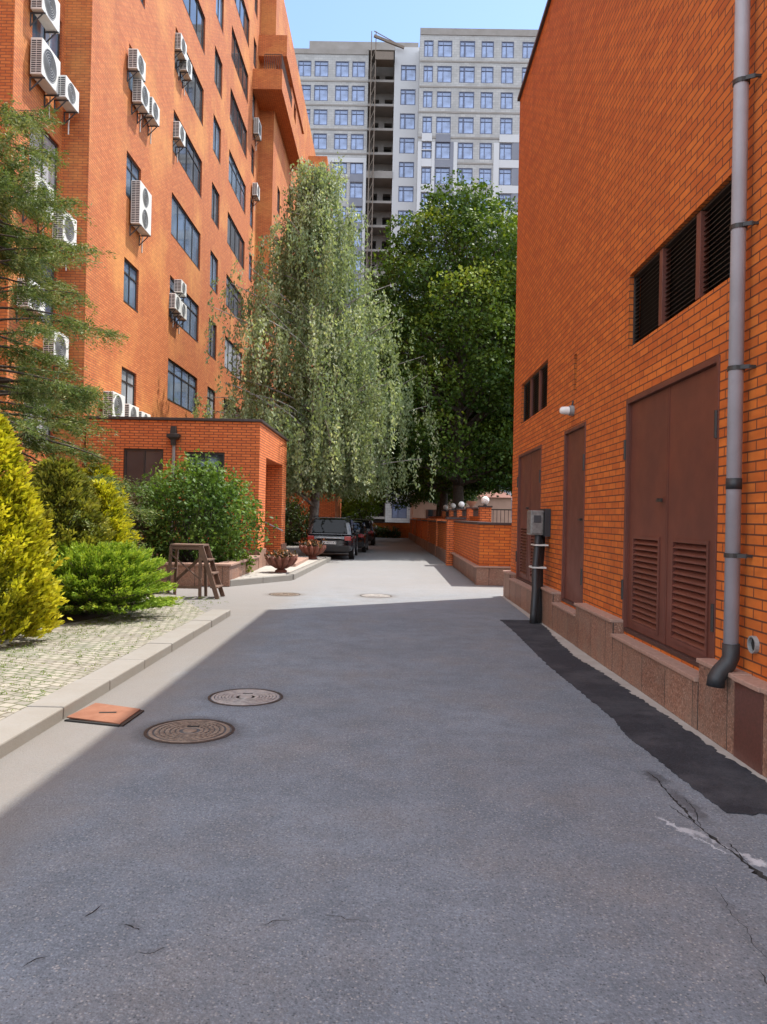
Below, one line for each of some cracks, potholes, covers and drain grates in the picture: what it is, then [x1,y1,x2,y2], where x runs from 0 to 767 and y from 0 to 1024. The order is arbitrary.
manhole cover [207,688,283,706]
manhole cover [143,719,235,744]
crack [714,886,767,984]
